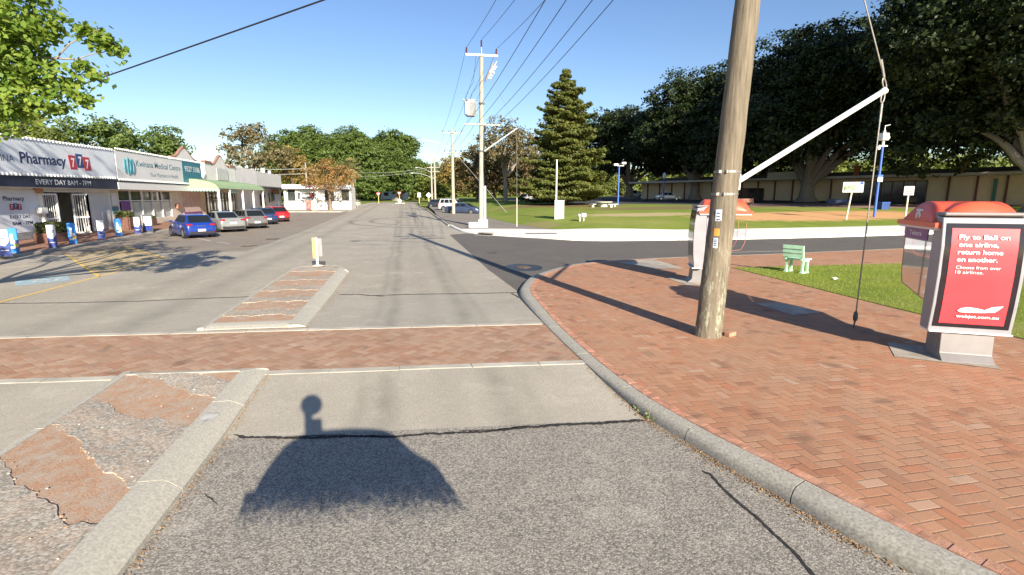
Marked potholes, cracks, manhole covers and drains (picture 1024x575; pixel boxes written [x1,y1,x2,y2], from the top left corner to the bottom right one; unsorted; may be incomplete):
crack [703,470,815,575]
